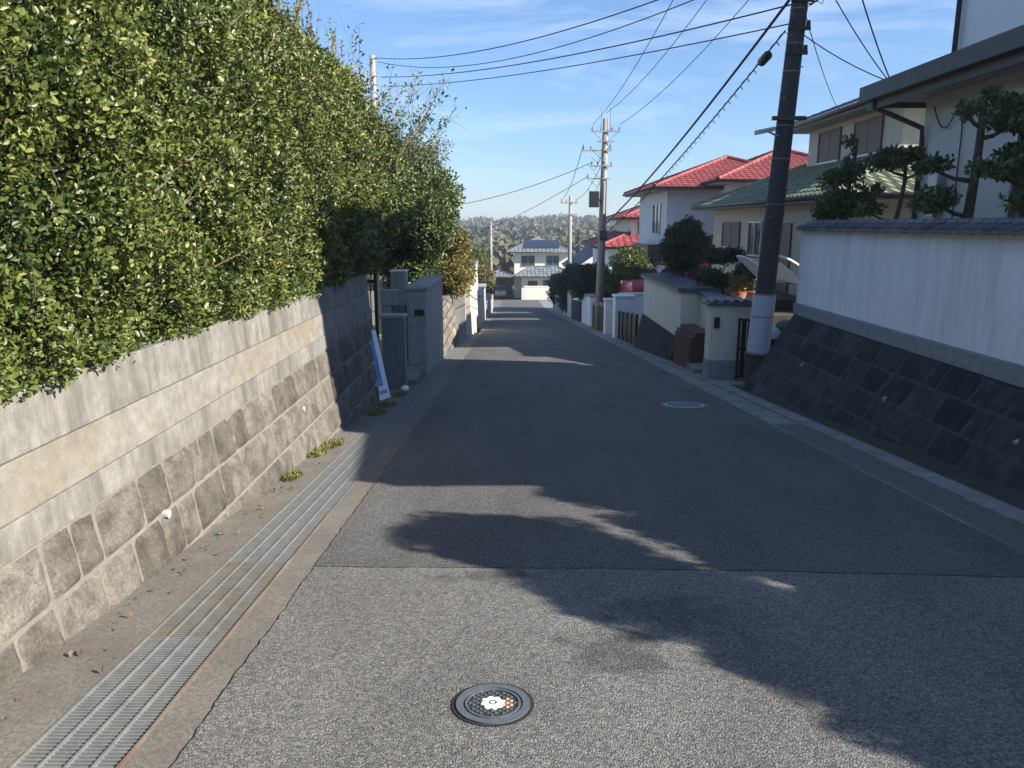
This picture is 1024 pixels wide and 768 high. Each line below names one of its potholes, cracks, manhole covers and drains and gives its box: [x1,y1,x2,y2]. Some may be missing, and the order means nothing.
manhole cover [452,683,534,727]
drain grate [8,636,224,768]
drain grate [227,513,327,562]
drain grate [314,455,378,480]
drain grate [148,561,287,637]
drain grate [278,480,358,514]
